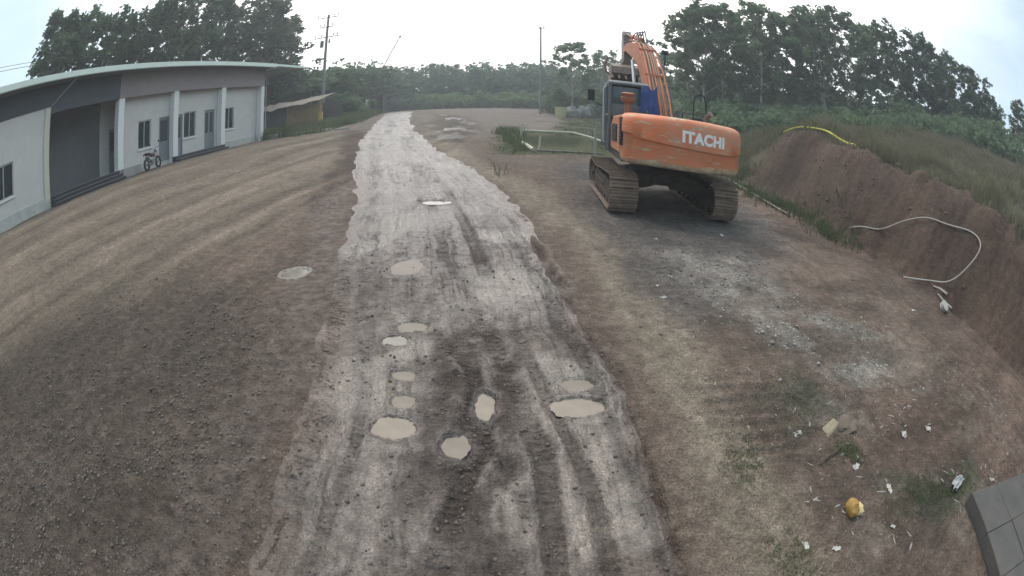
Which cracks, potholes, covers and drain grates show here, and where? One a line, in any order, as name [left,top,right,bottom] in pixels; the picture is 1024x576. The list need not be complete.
pothole [386,368,421,383]
pothole [473,387,499,424]
pothole [364,411,421,442]
pothole [277,266,313,280]
pothole [414,199,455,207]
pothole [378,333,411,347]
pothole [544,393,614,422]
pothole [434,428,475,463]
pothole [391,319,434,334]
pothole [386,392,422,412]
pothole [383,257,430,277]
pothole [552,376,603,393]
